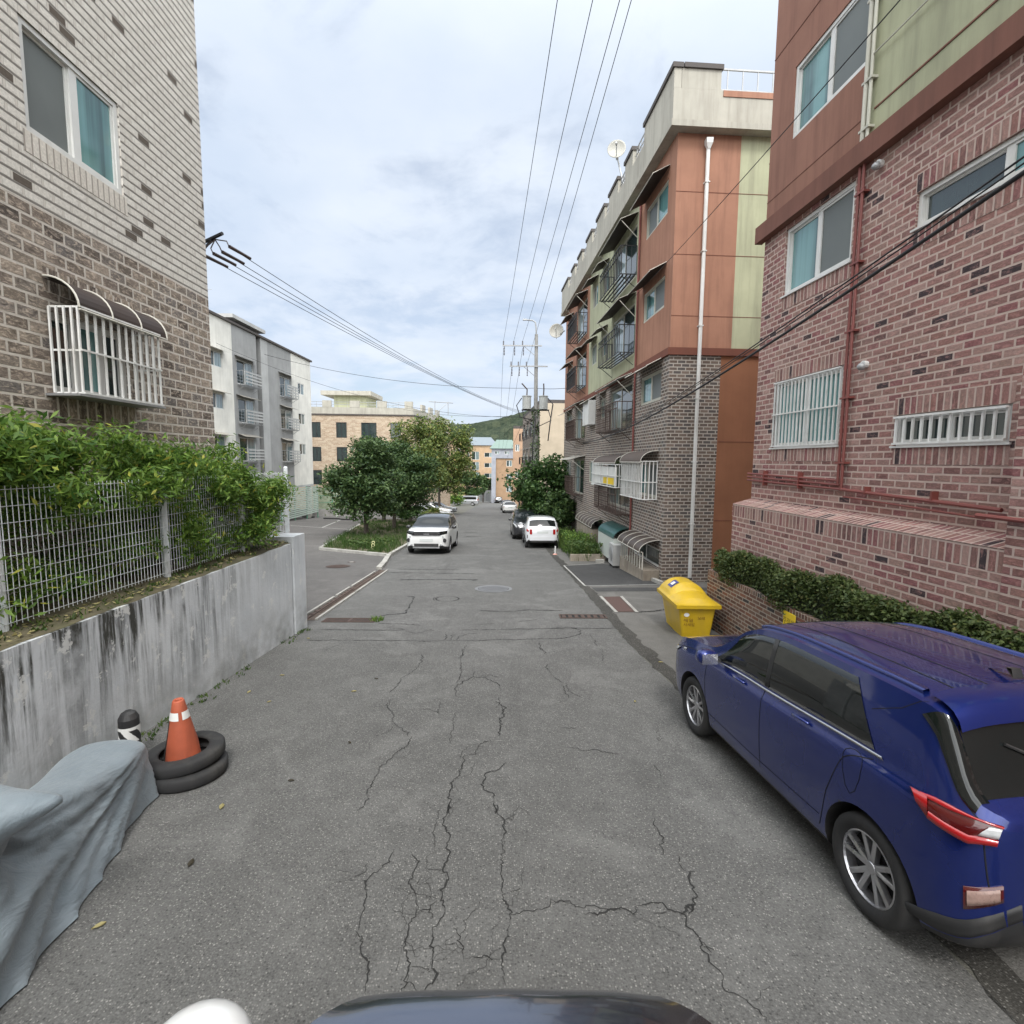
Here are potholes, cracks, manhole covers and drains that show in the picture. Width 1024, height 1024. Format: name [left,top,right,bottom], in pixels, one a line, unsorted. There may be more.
crack [316,596,770,1023]
